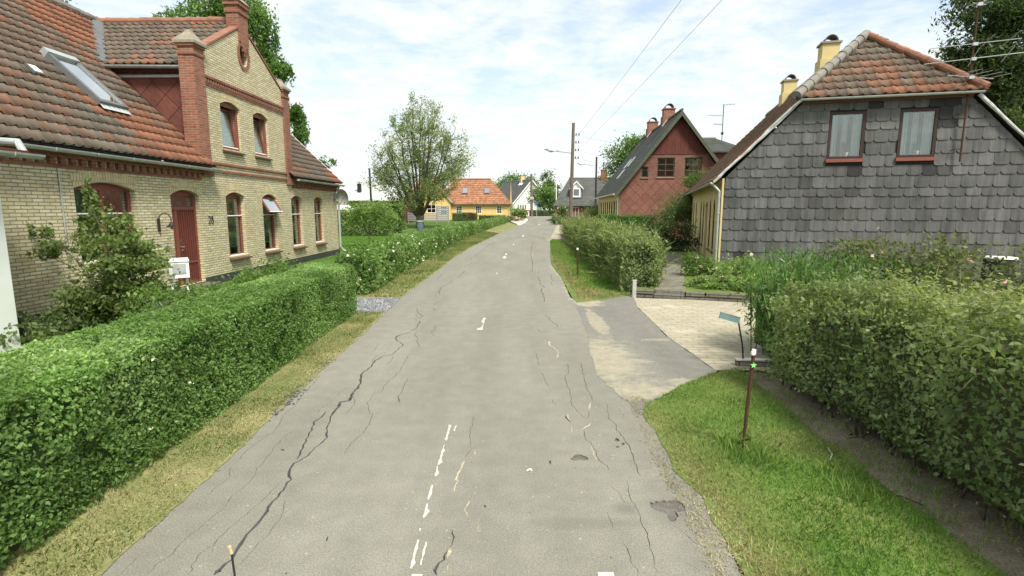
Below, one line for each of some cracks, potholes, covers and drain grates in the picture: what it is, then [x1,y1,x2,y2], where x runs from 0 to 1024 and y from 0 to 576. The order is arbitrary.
pothole [650,500,686,522]
crack [154,242,494,575]
crack [500,243,659,573]
